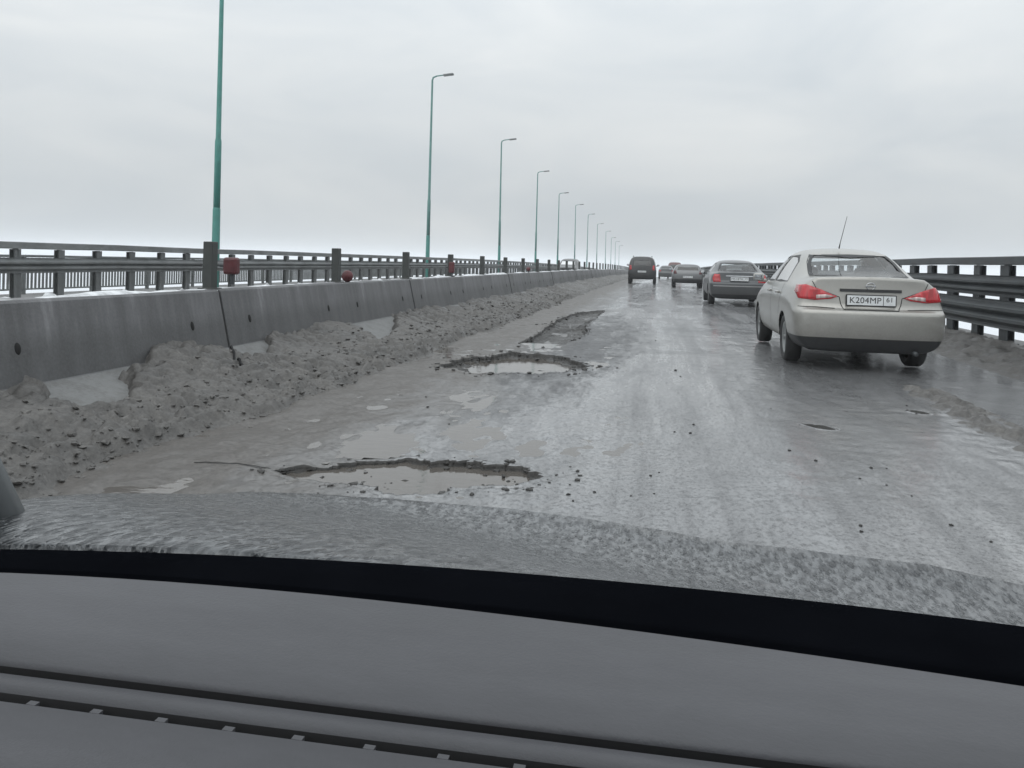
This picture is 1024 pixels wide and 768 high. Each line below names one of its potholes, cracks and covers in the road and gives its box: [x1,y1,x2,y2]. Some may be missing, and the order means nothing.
crack [194,462,295,471]
pothole [517,310,605,348]
pothole [251,454,582,499]
pothole [799,423,840,431]
pothole [429,350,618,377]
